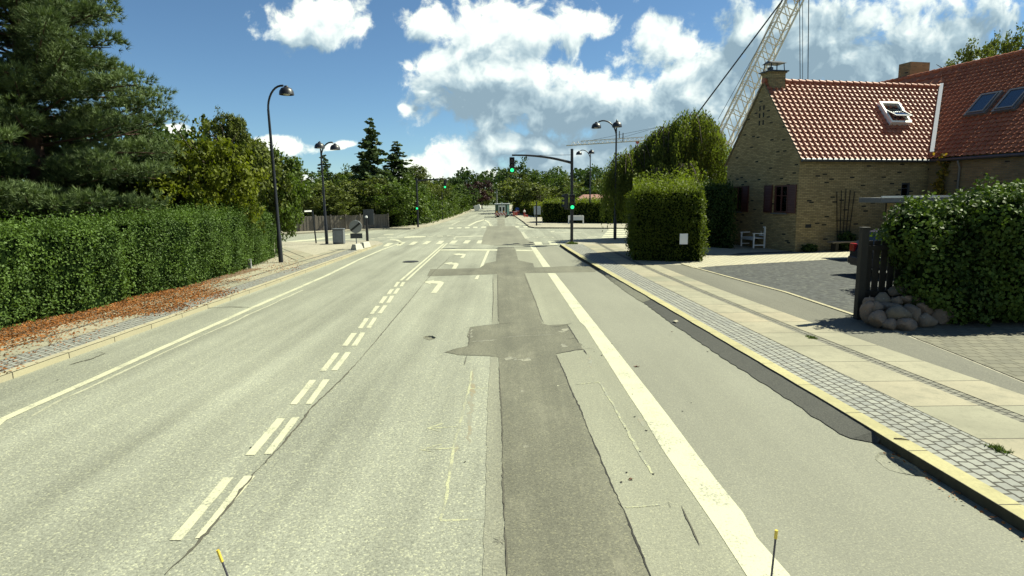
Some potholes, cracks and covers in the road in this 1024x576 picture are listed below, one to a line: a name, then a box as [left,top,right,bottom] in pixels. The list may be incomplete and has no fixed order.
crack [525,277,651,576]
